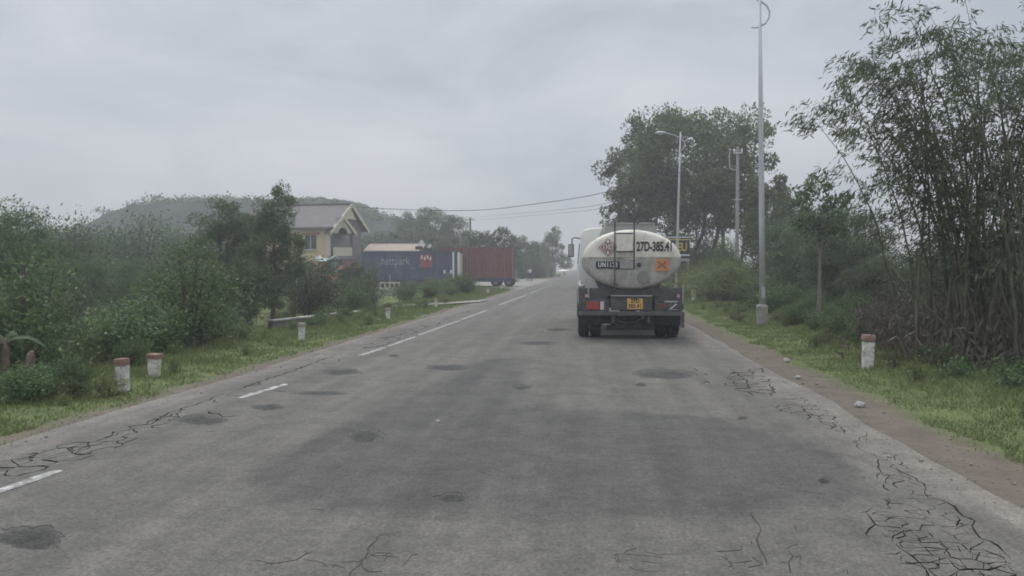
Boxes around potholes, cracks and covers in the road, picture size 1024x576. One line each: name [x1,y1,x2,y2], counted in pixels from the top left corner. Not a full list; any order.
crack [614,548,691,572]
crack [717,433,1017,576]
pothole [433,492,469,502]
pothole [345,428,385,444]
pothole [632,369,697,379]
crack [694,368,845,433]
crack [257,537,418,576]
pothole [173,413,228,425]
pothole [0,525,65,551]
